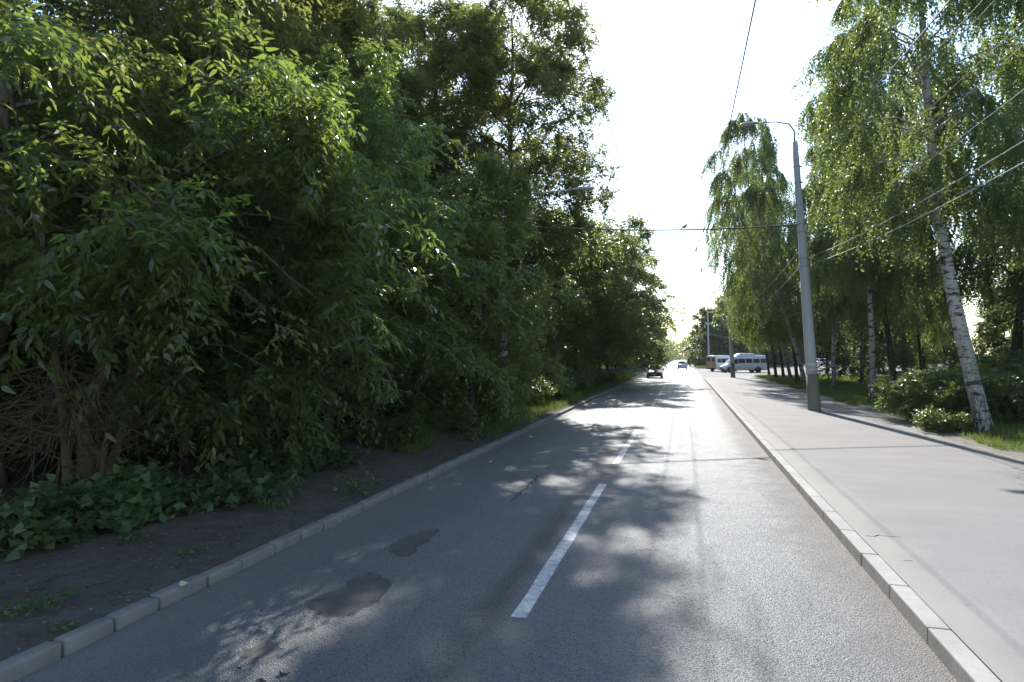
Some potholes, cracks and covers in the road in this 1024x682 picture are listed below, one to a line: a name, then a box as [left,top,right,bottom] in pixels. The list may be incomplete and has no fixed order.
pothole [239,640,285,660]
crack [510,475,538,501]
pothole [388,528,440,557]
pothole [304,572,392,619]
